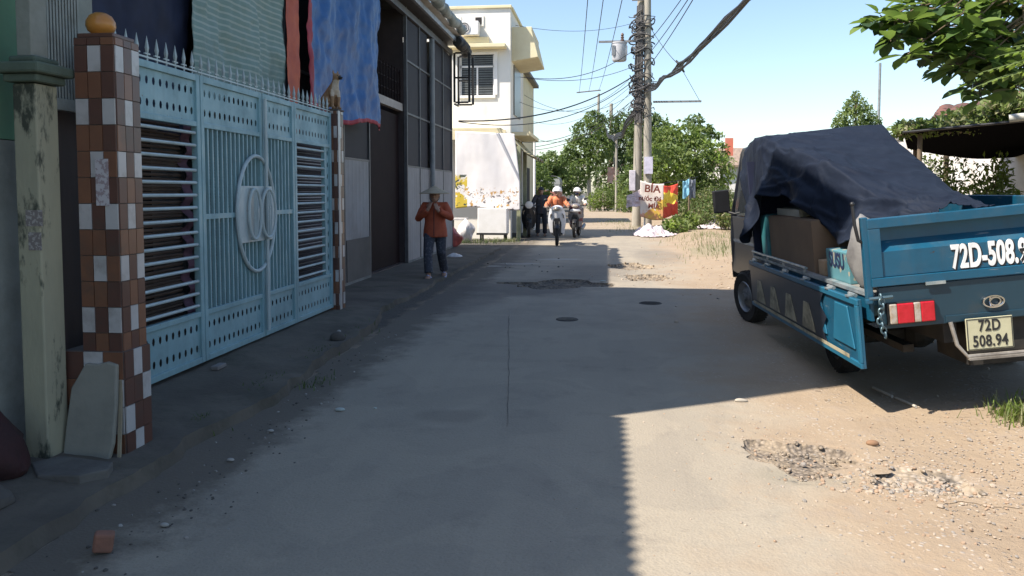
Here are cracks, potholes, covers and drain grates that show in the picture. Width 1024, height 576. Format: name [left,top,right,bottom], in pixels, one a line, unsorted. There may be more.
pothole [621,274,677,282]
pothole [493,279,618,290]
pothole [604,262,658,270]
pothole [733,436,893,486]
